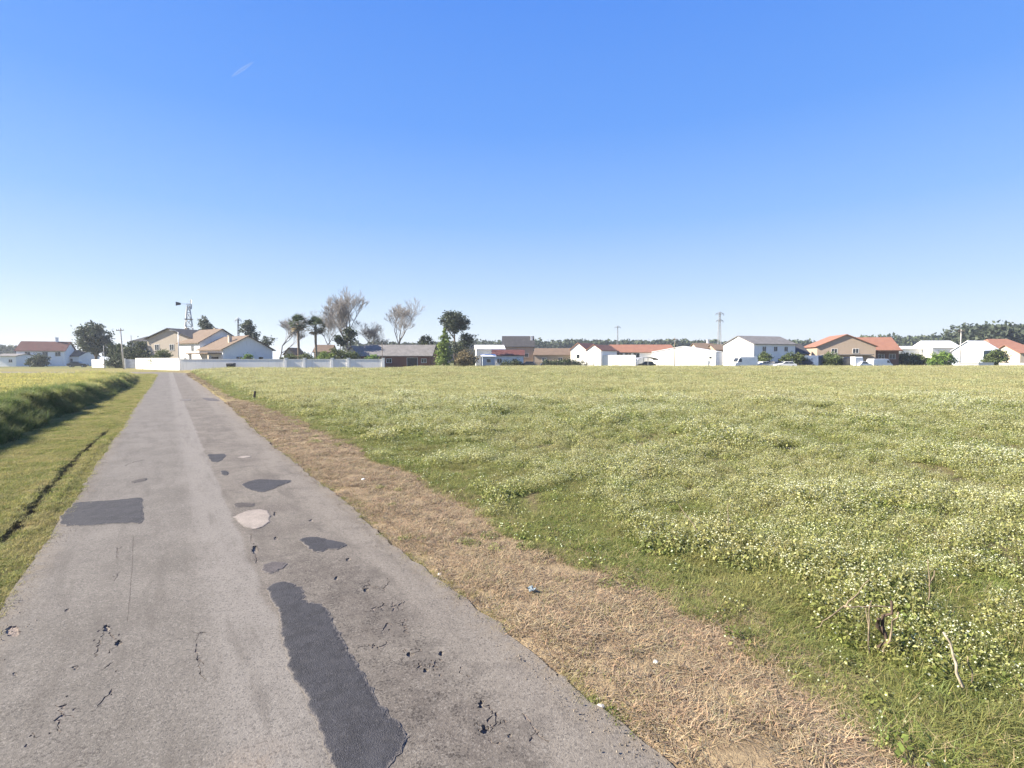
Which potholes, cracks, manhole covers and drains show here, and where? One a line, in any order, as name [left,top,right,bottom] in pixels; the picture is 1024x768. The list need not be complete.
crack [188,631,206,679]
crack [93,630,120,672]
crack [466,687,549,745]
pothole [5,625,21,637]
crack [358,578,469,677]
crack [24,695,76,747]
